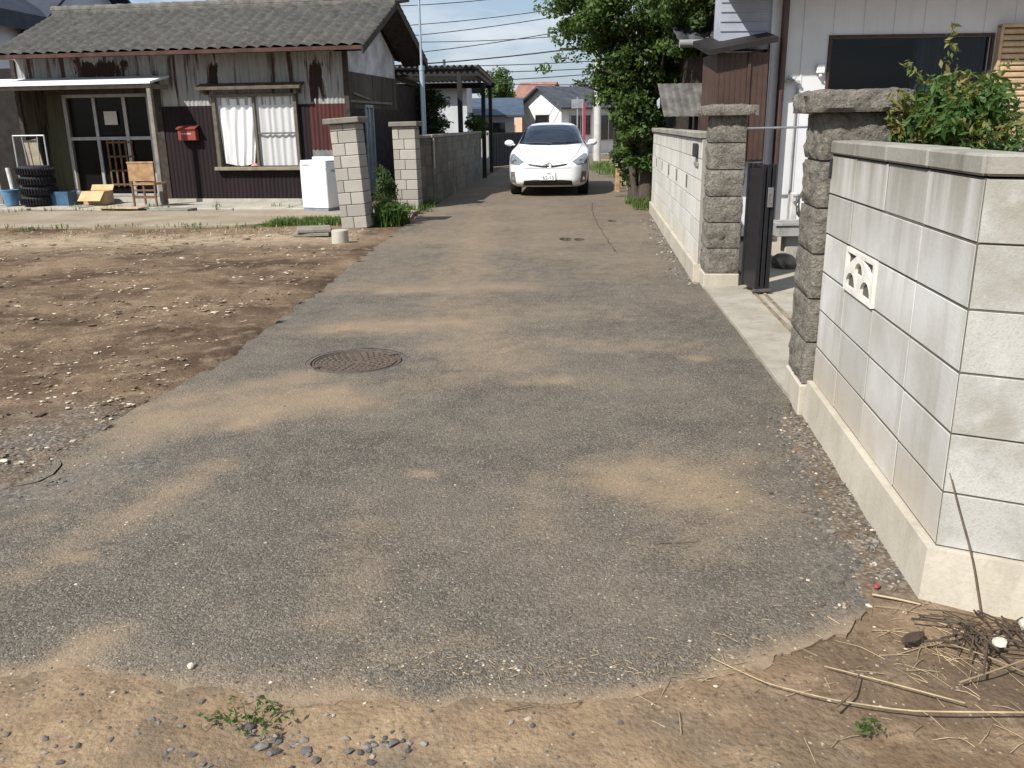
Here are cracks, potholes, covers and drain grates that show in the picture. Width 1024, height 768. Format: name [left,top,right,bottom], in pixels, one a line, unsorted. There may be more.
manhole cover [305,349,407,374]
